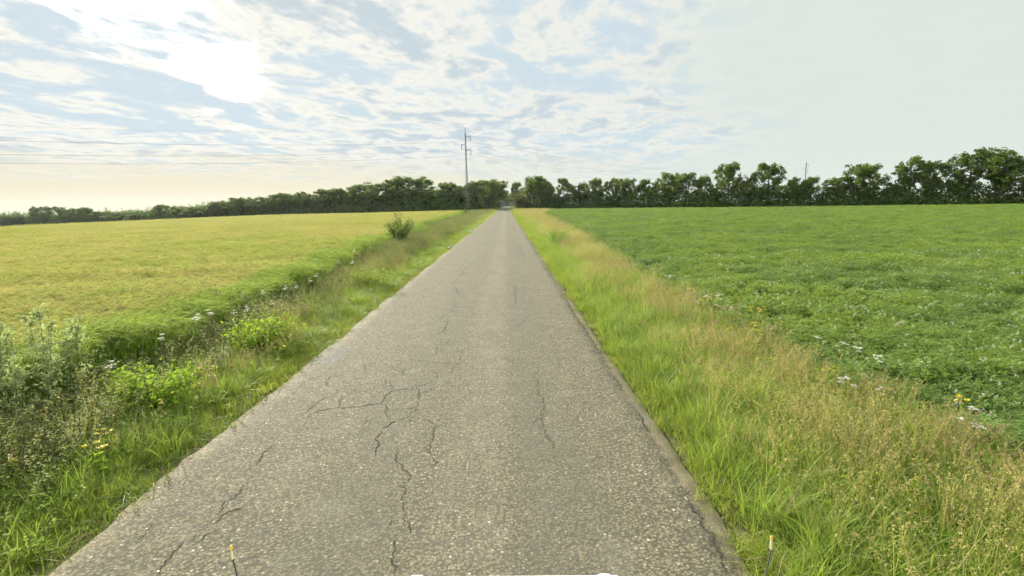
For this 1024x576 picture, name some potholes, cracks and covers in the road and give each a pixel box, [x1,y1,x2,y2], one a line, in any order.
crack [299,270,496,570]
crack [516,368,555,450]
crack [159,447,271,573]
crack [543,261,727,570]
